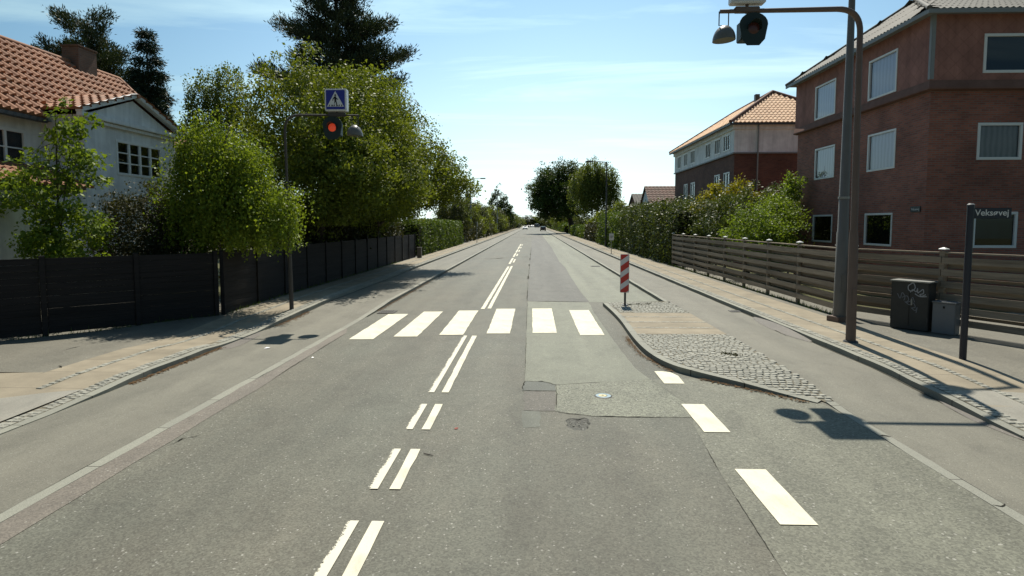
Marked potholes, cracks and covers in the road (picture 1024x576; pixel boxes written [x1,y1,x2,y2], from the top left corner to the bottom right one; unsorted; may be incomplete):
pothole [565,418,592,431]
